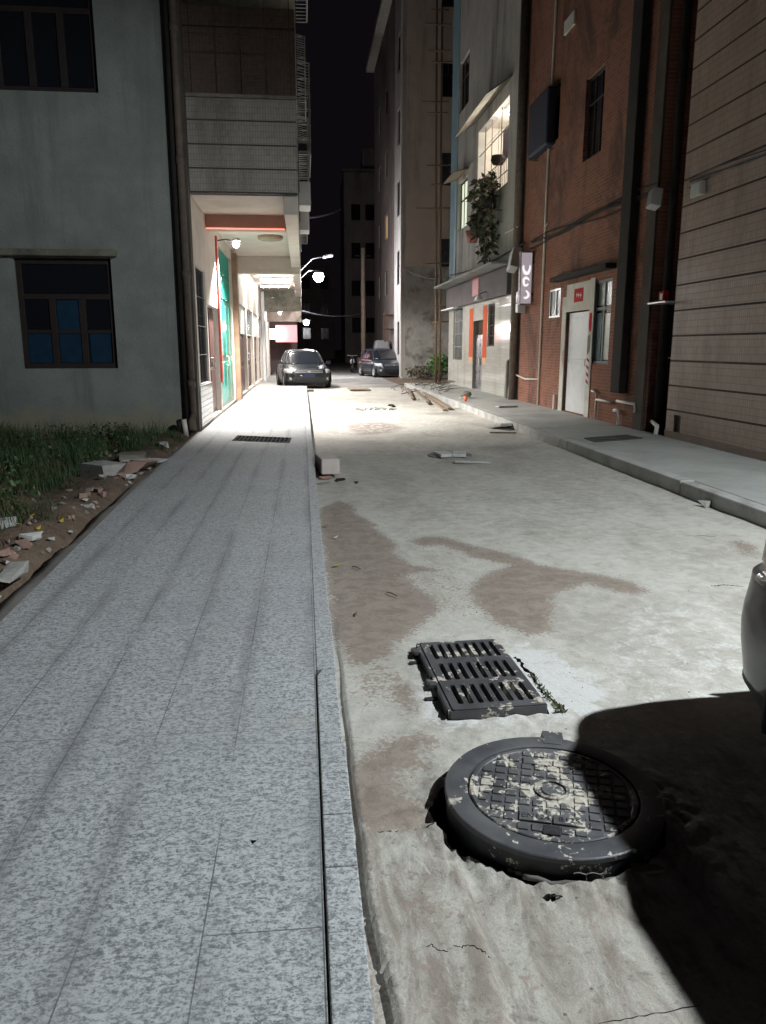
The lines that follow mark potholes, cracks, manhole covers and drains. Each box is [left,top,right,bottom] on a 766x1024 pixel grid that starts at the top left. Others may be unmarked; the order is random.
manhole cover [445,731,666,885]
crack [599,1005,701,1024]
drain grate [584,434,642,443]
crack [426,944,490,958]
drain grate [409,639,547,721]
drain grate [232,435,291,443]
